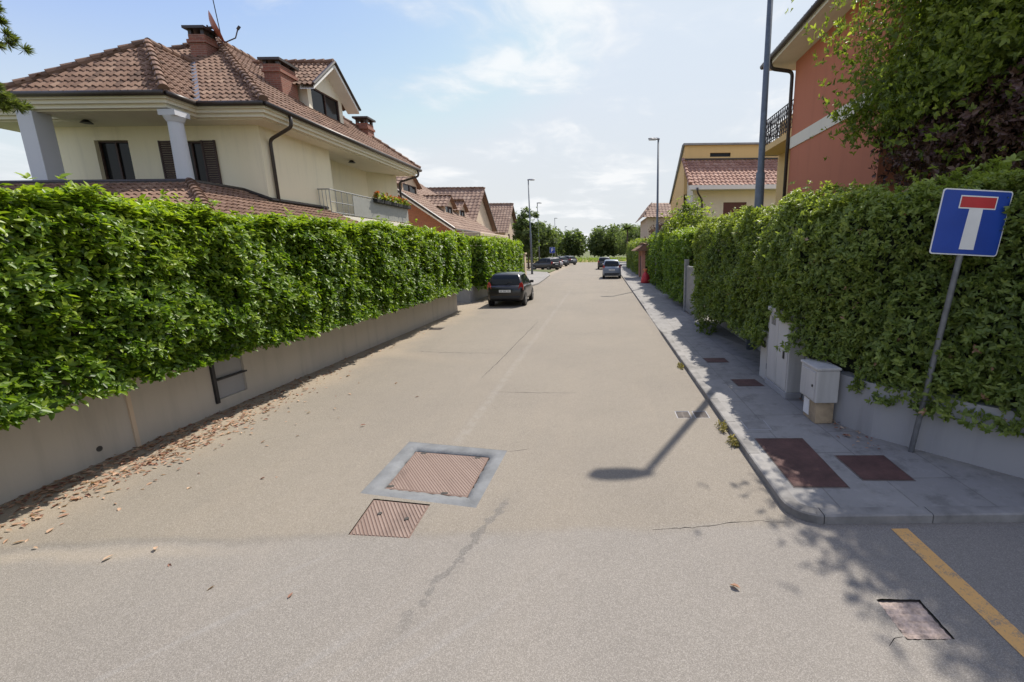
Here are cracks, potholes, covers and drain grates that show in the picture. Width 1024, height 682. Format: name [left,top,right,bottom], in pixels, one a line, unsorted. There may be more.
manhole cover [349,500,430,538]
manhole cover [361,442,507,508]
crack [655,520,785,530]
